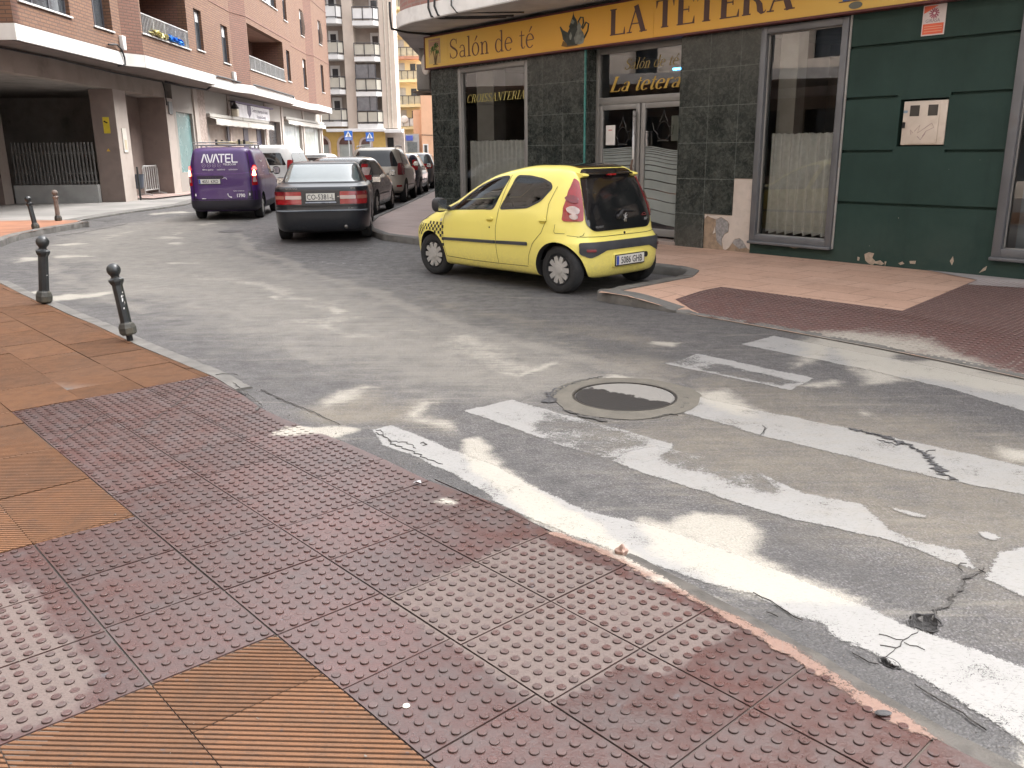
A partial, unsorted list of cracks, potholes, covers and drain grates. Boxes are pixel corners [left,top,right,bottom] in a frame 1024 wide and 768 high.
crack [753,592,803,621]
pothole [906,613,944,634]
crack [849,428,959,481]
crack [852,562,986,664]
crack [914,684,986,730]
manhole cover [551,378,702,420]
crack [261,389,339,424]
